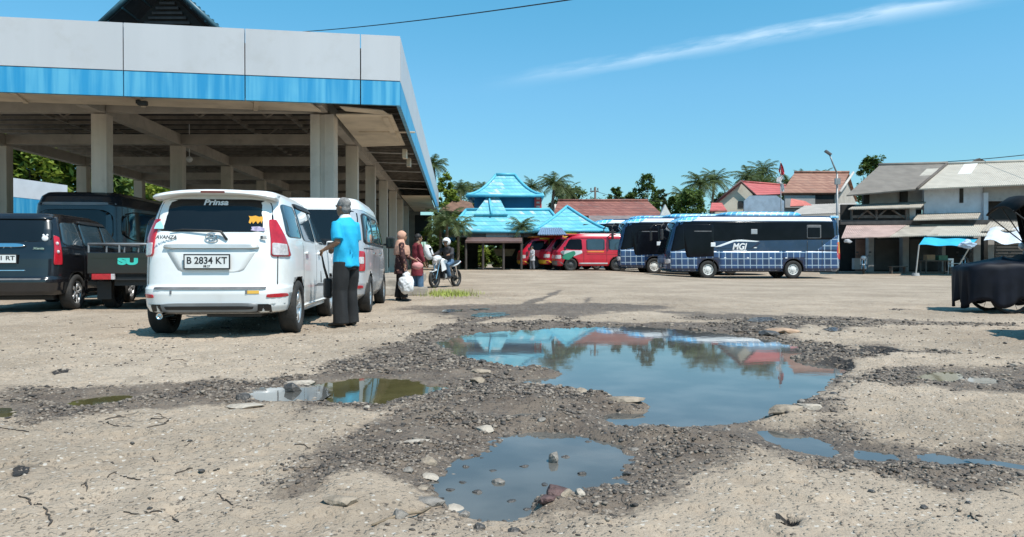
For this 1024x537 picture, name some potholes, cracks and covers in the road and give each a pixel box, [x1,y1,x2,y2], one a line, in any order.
pothole [429,325,856,428]
pothole [56,391,146,407]
pothole [904,446,978,466]
pothole [910,369,973,382]
pothole [393,412,651,531]
pothole [835,440,918,464]
crack [18,495,53,526]
pothole [311,375,454,406]
